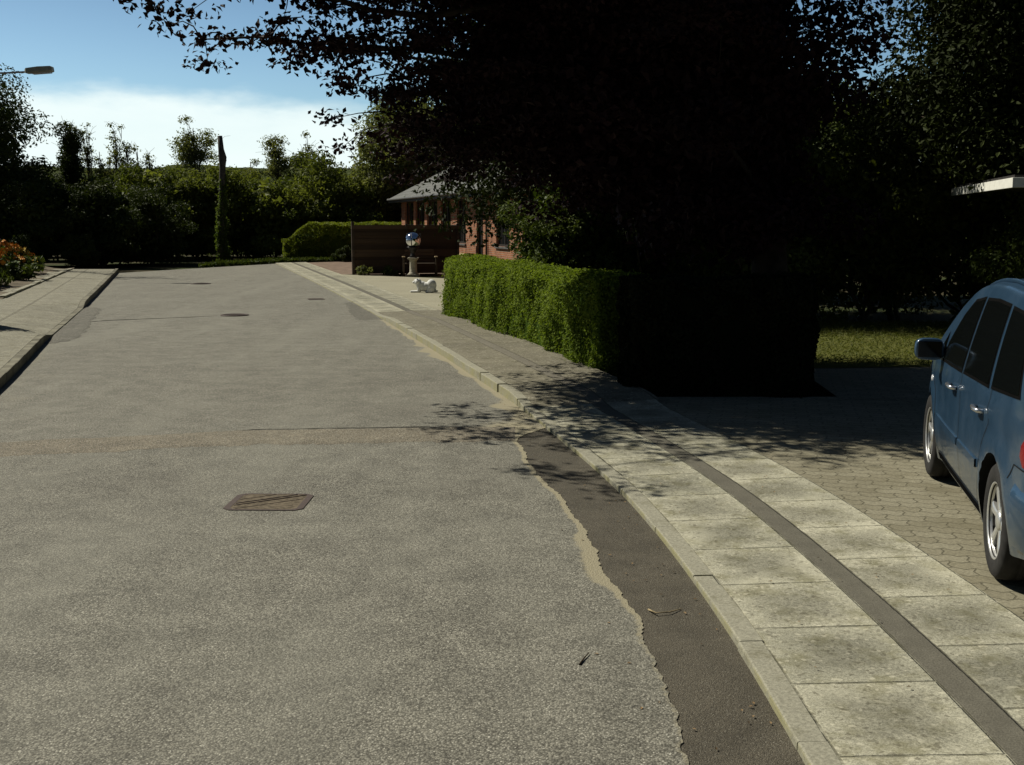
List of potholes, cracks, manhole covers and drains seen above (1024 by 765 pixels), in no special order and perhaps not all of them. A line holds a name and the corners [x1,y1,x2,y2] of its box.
manhole cover [223,493,314,511]
